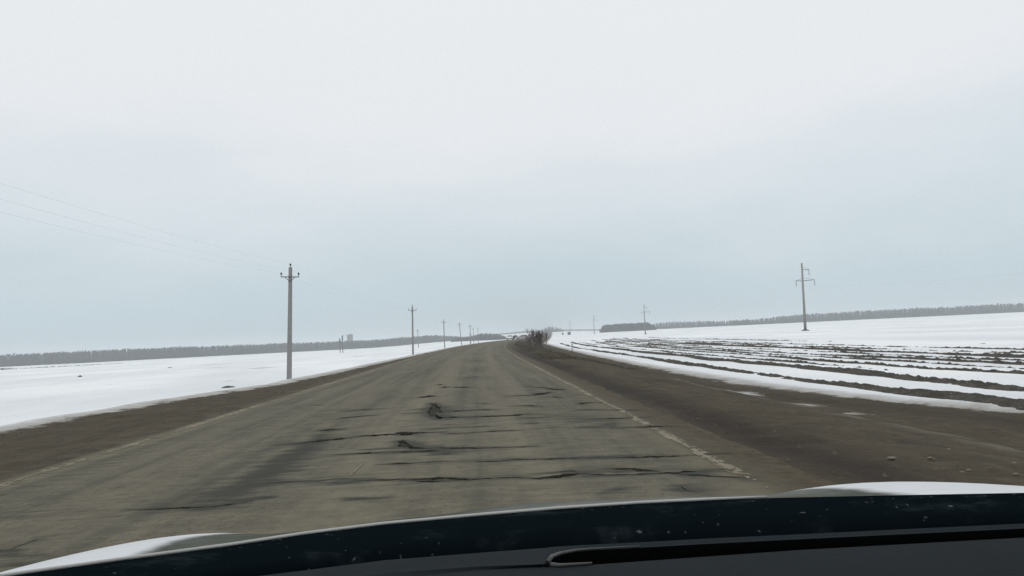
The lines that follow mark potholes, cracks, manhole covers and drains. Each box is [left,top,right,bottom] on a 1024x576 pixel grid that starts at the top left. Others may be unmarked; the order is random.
crack [142,387,739,510]
pothole [427,403,445,419]
